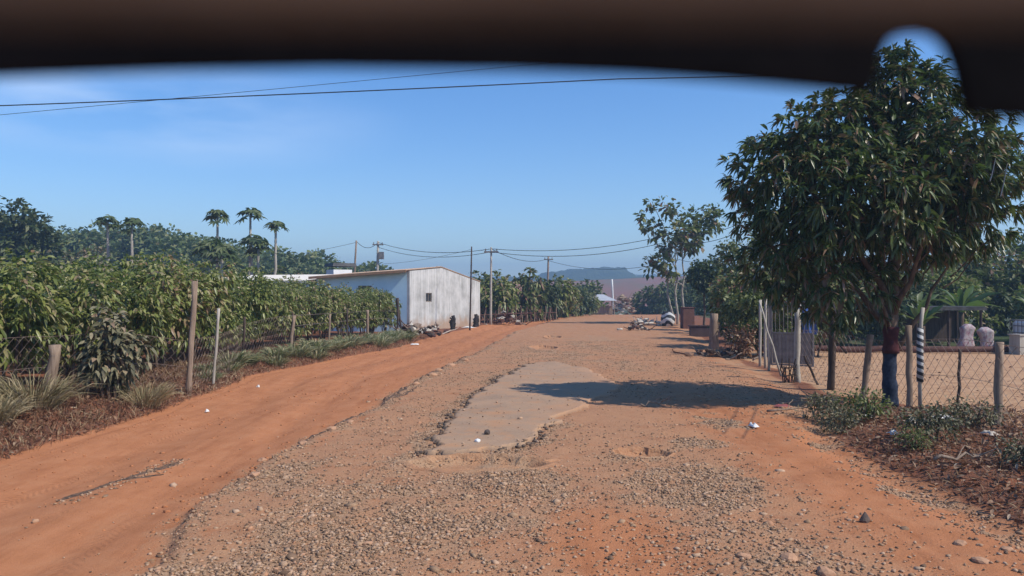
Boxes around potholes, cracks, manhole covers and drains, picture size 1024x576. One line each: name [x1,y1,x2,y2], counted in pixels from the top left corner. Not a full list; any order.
crack [57,458,183,502]
pothole [391,453,561,474]
pothole [610,446,676,459]
